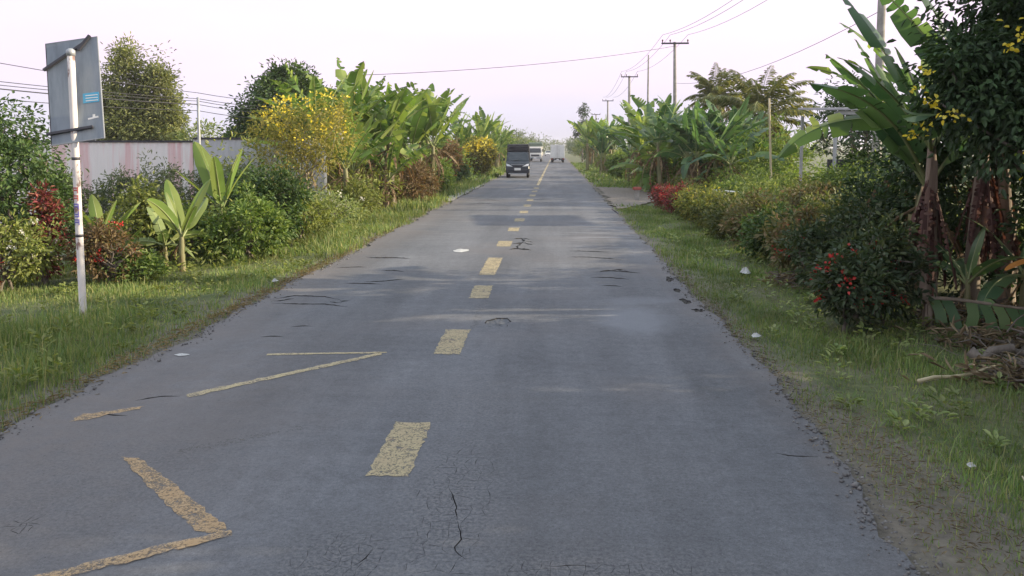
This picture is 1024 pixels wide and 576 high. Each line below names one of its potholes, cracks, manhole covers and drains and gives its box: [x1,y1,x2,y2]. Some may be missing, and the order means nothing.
crack [100,391,185,416]
crack [260,256,411,337]
pothole [485,318,511,329]
crack [399,448,494,575]
crack [290,533,392,576]
crack [569,250,641,287]
crack [772,446,818,457]
